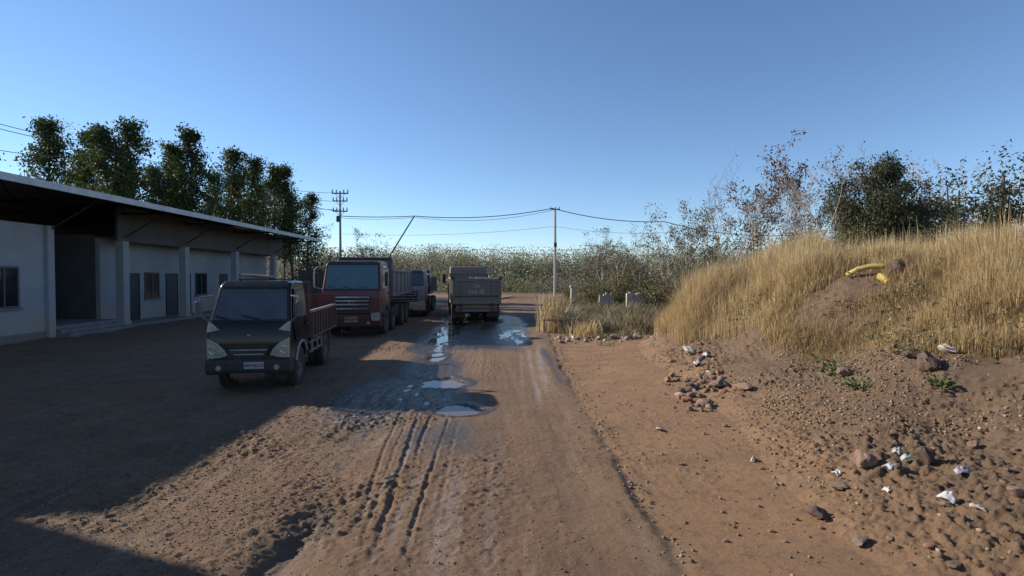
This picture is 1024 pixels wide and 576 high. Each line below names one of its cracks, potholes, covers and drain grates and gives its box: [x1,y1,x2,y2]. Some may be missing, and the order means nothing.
pothole [424,352,451,363]
pothole [414,375,476,390]
pothole [424,400,495,418]
